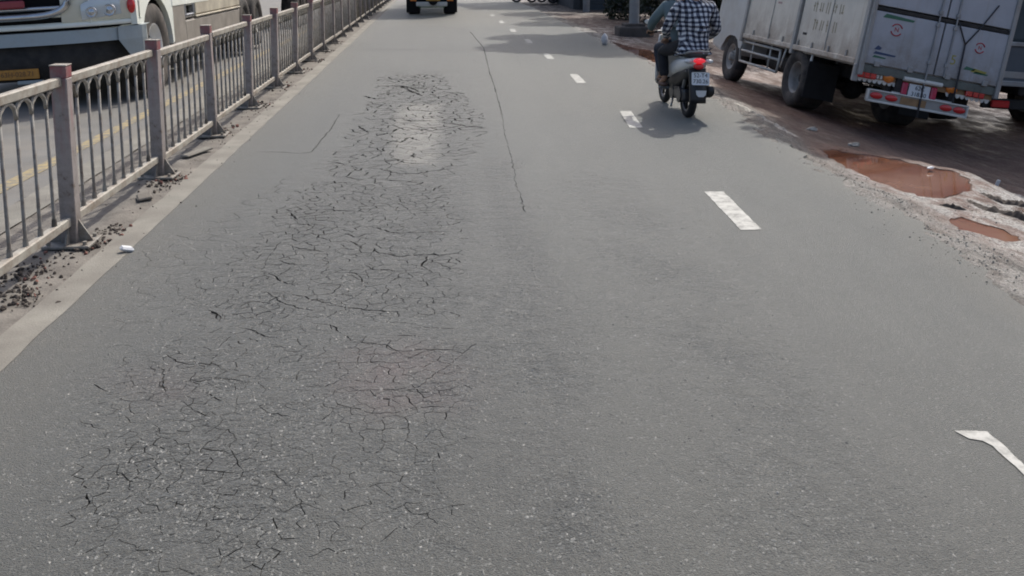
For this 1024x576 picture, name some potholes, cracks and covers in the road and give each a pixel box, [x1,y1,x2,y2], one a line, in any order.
pothole [949,217,1021,242]
crack [60,179,468,576]
pothole [820,149,972,198]
crack [318,74,487,186]
